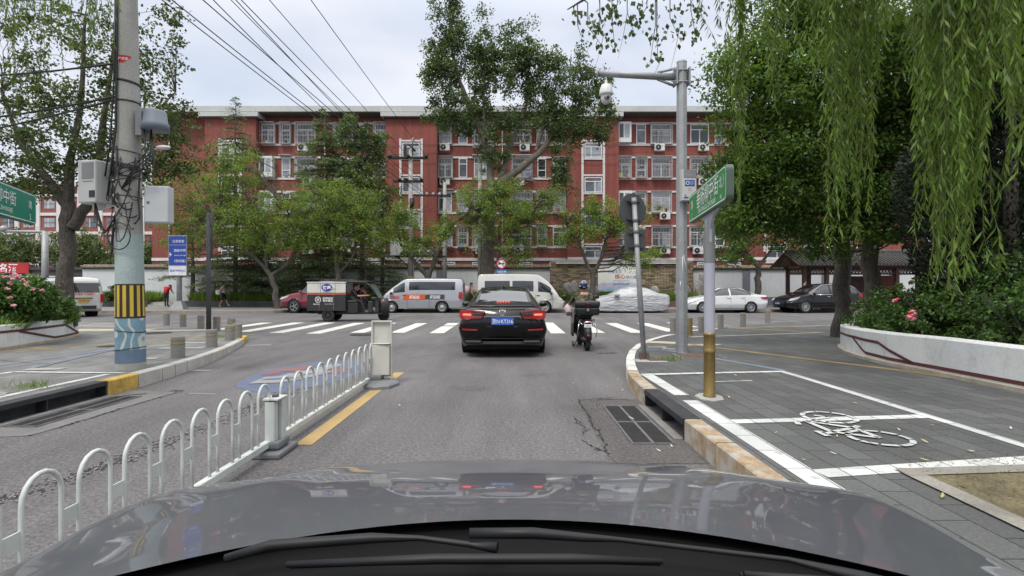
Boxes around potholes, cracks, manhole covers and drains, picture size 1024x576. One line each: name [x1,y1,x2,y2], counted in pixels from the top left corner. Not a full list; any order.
drain grate [602,405,676,444]
crack [574,397,623,462]
drain grate [0,381,114,427]
